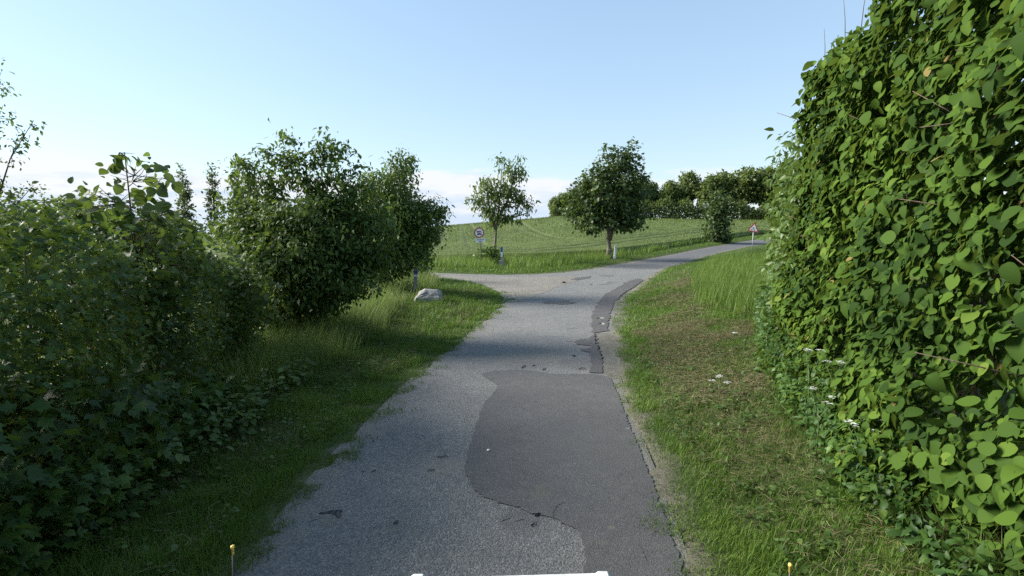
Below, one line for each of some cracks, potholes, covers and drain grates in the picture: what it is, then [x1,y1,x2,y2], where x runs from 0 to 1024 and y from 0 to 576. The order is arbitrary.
pothole [318,509,342,518]
